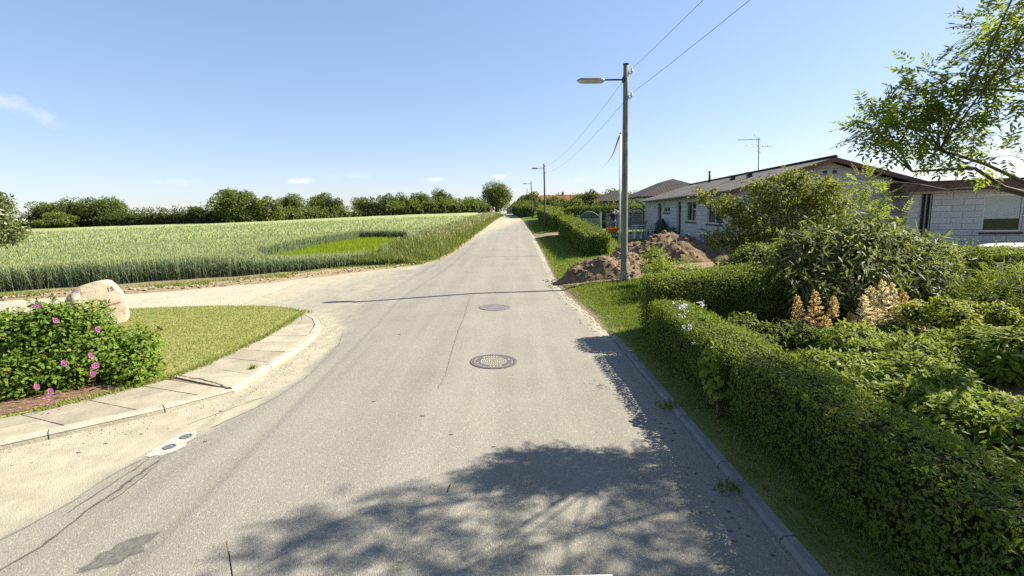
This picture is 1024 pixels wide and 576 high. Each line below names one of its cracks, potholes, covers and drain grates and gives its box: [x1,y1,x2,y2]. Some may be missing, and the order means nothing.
manhole cover [470,354,517,369]
crack [0,459,160,571]
